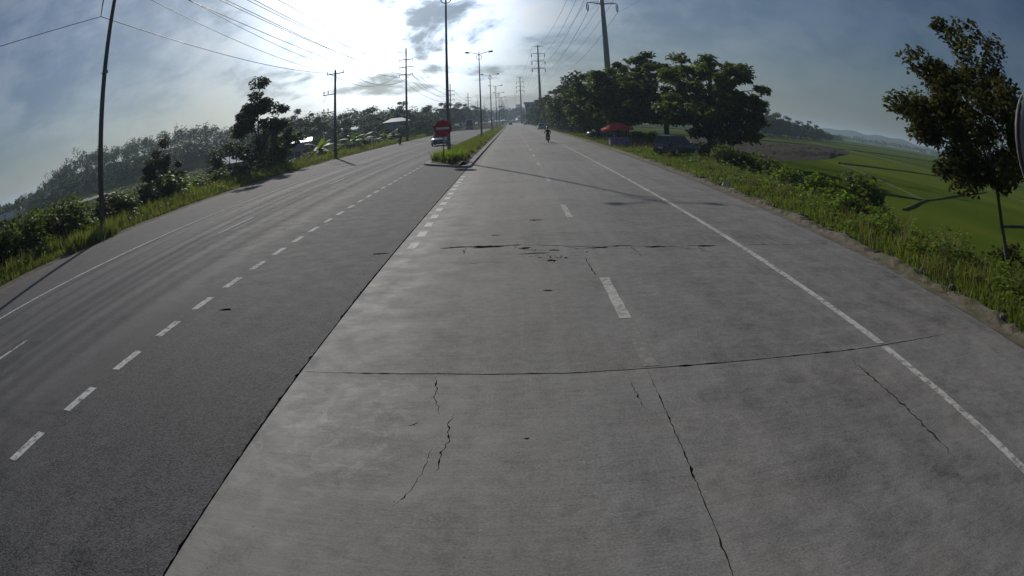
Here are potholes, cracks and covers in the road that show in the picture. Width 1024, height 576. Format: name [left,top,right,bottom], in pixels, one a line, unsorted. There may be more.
crack [853,360,952,455]
crack [392,376,453,507]
